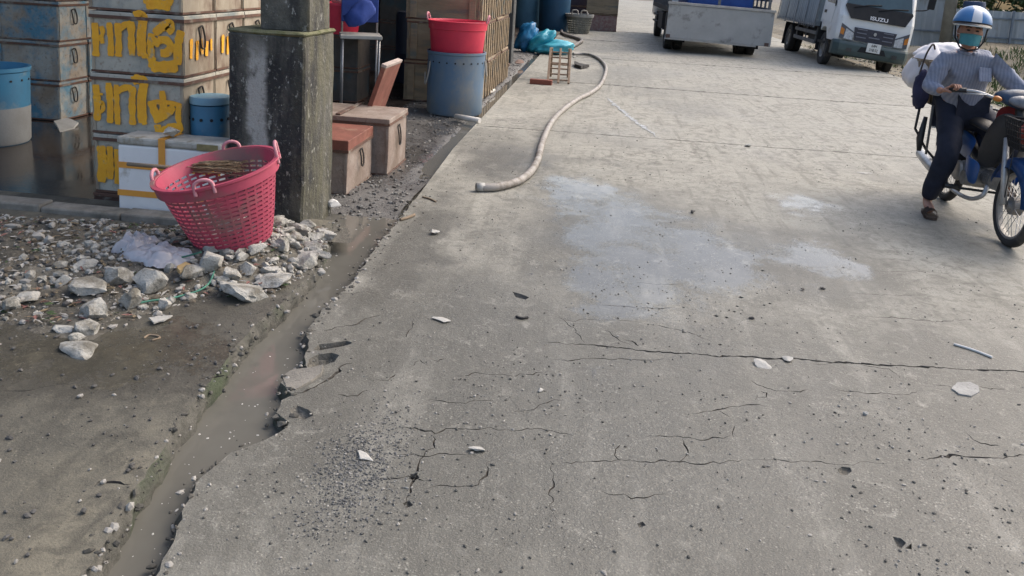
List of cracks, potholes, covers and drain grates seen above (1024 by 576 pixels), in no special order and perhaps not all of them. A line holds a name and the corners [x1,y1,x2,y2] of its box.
crack [926,435,1021,460]
pothole [313,341,352,351]
pothole [290,405,313,420]
crack [380,427,573,505]
crack [548,381,812,518]
pothole [307,353,339,367]
